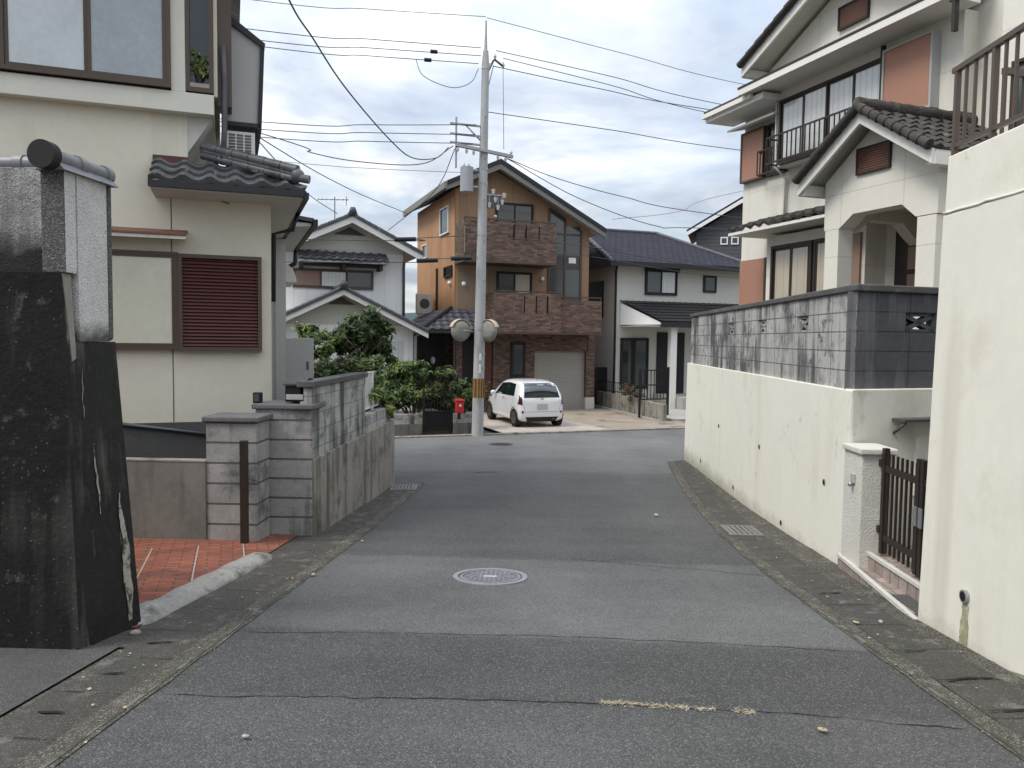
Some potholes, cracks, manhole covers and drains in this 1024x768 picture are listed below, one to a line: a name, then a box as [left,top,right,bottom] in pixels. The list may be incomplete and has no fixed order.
drain grate [719,524,765,536]
manhole cover [453,568,528,586]
